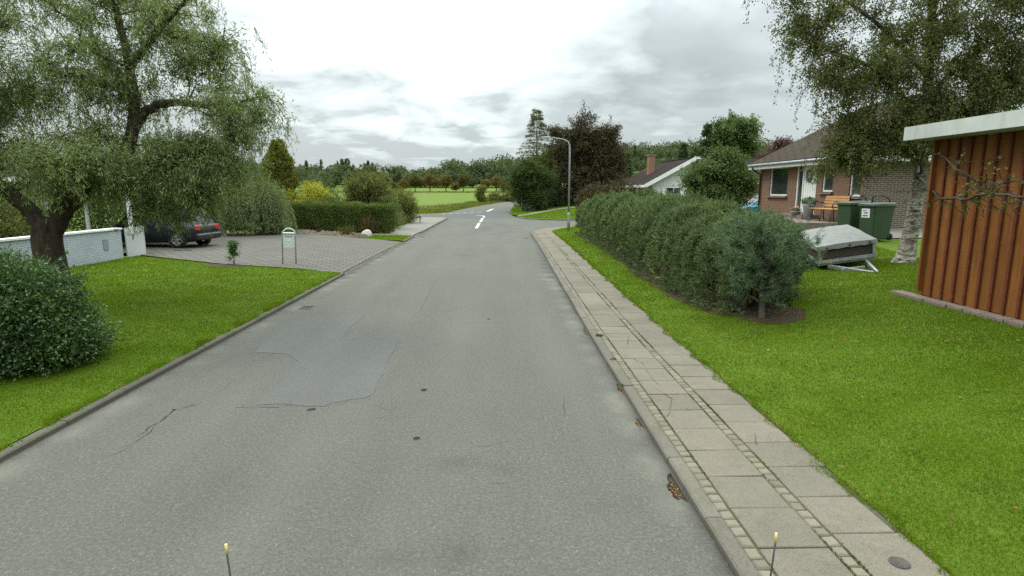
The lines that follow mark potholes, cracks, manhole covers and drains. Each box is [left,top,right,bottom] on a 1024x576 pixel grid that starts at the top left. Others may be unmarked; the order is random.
utility cover [888,556,911,569]
crack [93,401,201,464]
pothole [666,473,689,502]
